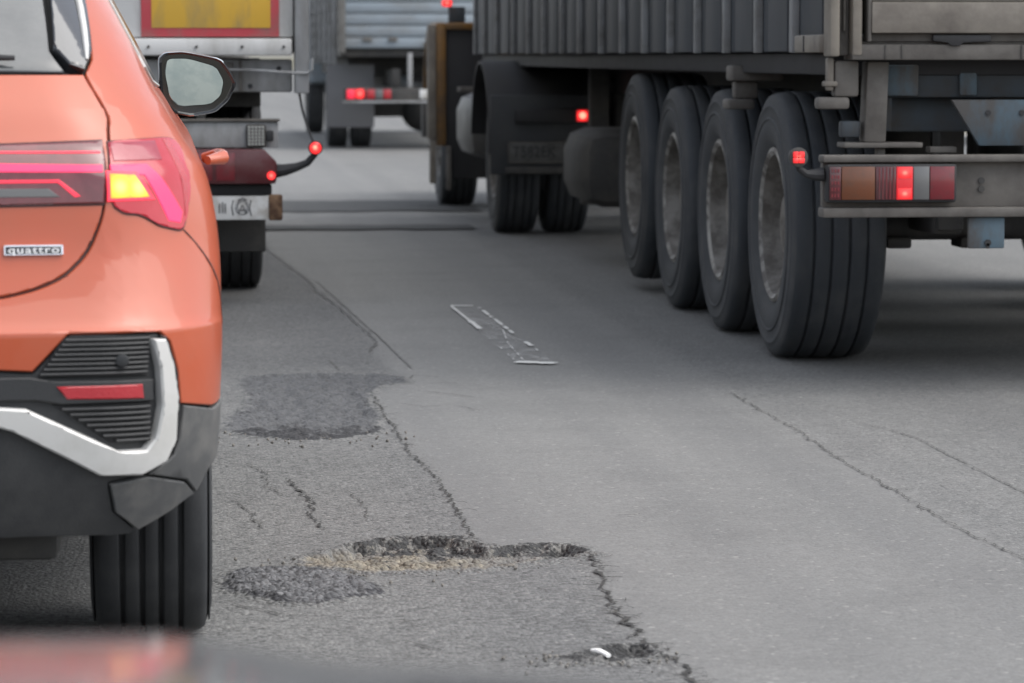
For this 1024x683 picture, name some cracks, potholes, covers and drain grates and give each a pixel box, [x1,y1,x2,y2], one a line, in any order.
pothole [532,642,671,668]
crack [570,552,717,683]
pothole [276,533,606,577]
crack [247,463,325,529]
pothole [212,566,398,608]
crack [366,375,477,539]
crack [731,392,1022,557]
